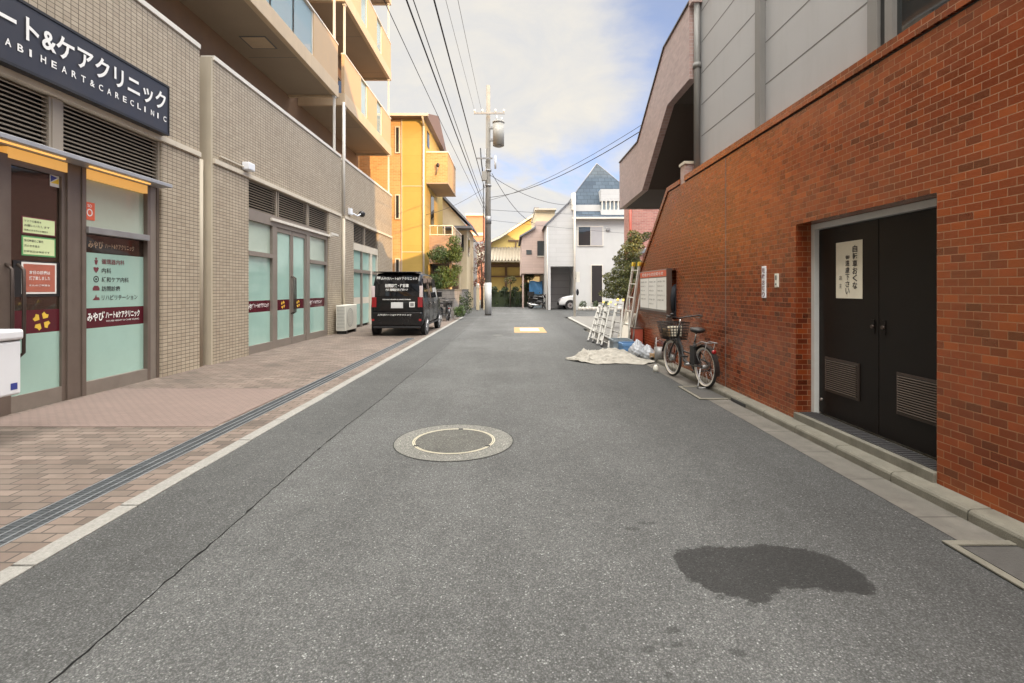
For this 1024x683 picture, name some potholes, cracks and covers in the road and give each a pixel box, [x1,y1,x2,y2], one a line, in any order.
manhole cover [393,424,514,461]
